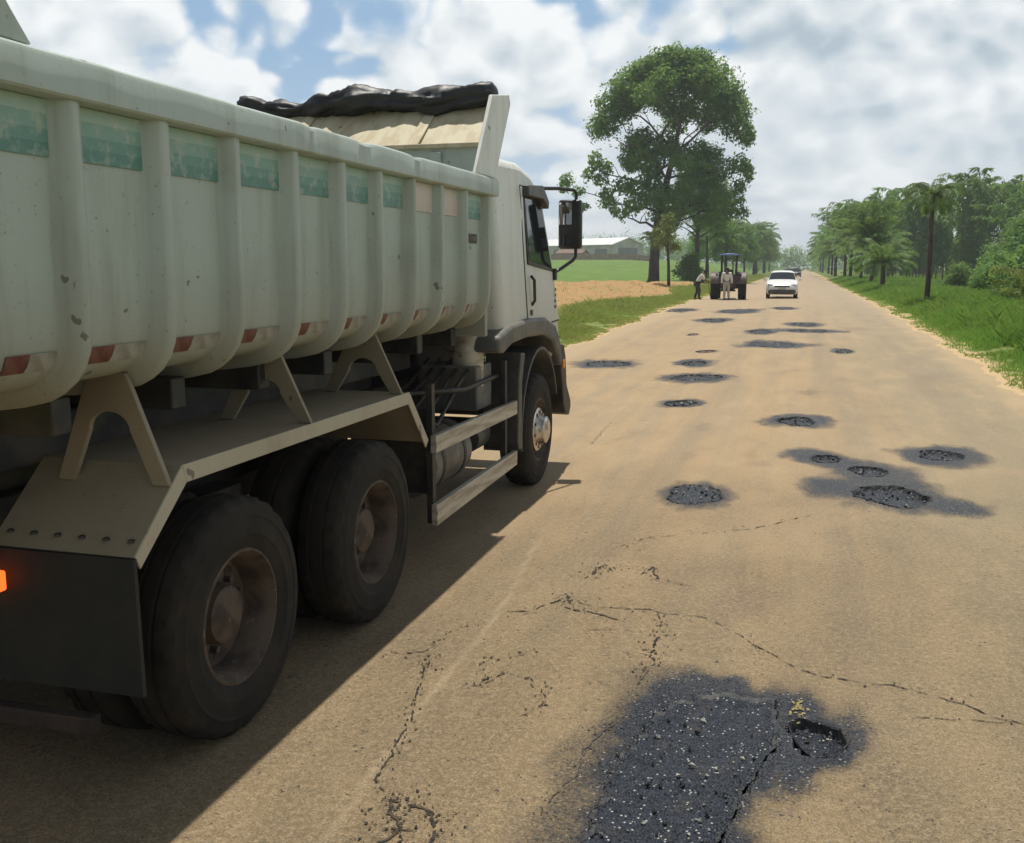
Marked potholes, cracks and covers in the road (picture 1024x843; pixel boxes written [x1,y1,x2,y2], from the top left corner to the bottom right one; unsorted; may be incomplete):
crack [570,515,809,586]
pothole [812,455,840,463]
crack [507,593,1024,815]
pothole [848,466,889,477]
pothole [667,484,722,505]
pothole [788,718,848,758]
pothole [776,416,815,426]
crack [358,622,484,843]
crack [465,649,553,716]
pothole [919,450,965,461]
pothole [851,485,932,509]
